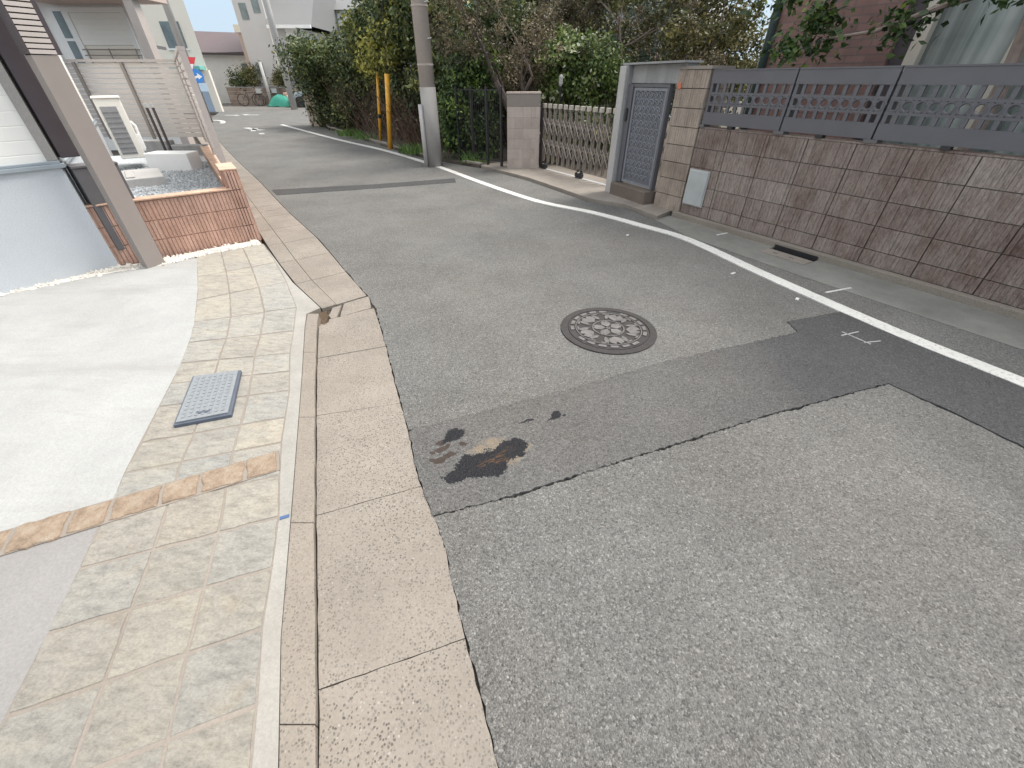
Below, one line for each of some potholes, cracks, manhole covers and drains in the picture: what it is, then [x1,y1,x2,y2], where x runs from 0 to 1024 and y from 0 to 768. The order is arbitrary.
drain grate [760,244,818,265]
manhole cover [561,307,657,355]
